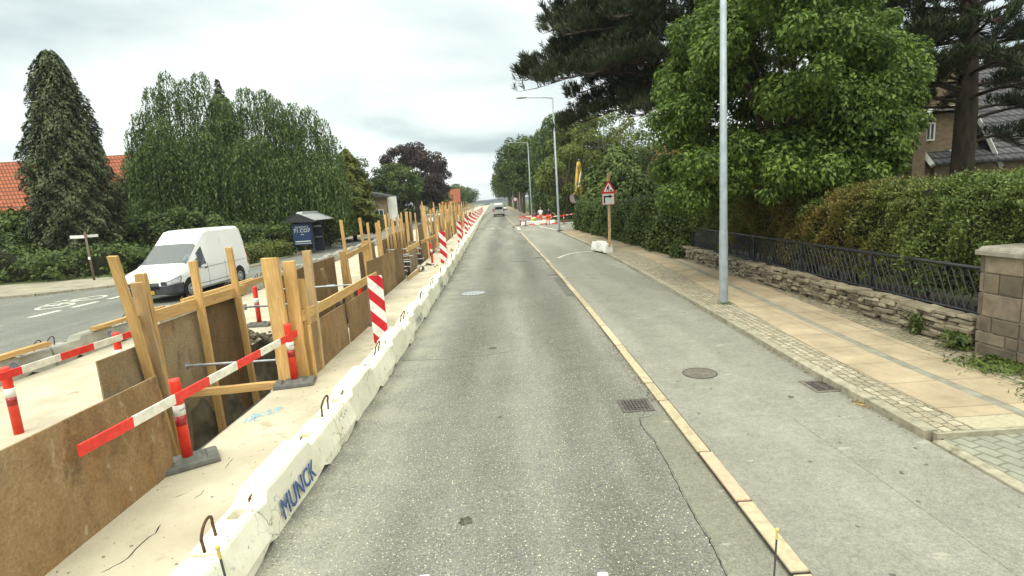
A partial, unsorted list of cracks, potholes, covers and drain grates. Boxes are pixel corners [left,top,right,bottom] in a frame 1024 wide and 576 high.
manhole cover [682,368,718,379]
drain grate [617,398,655,413]
drain grate [799,379,840,393]
